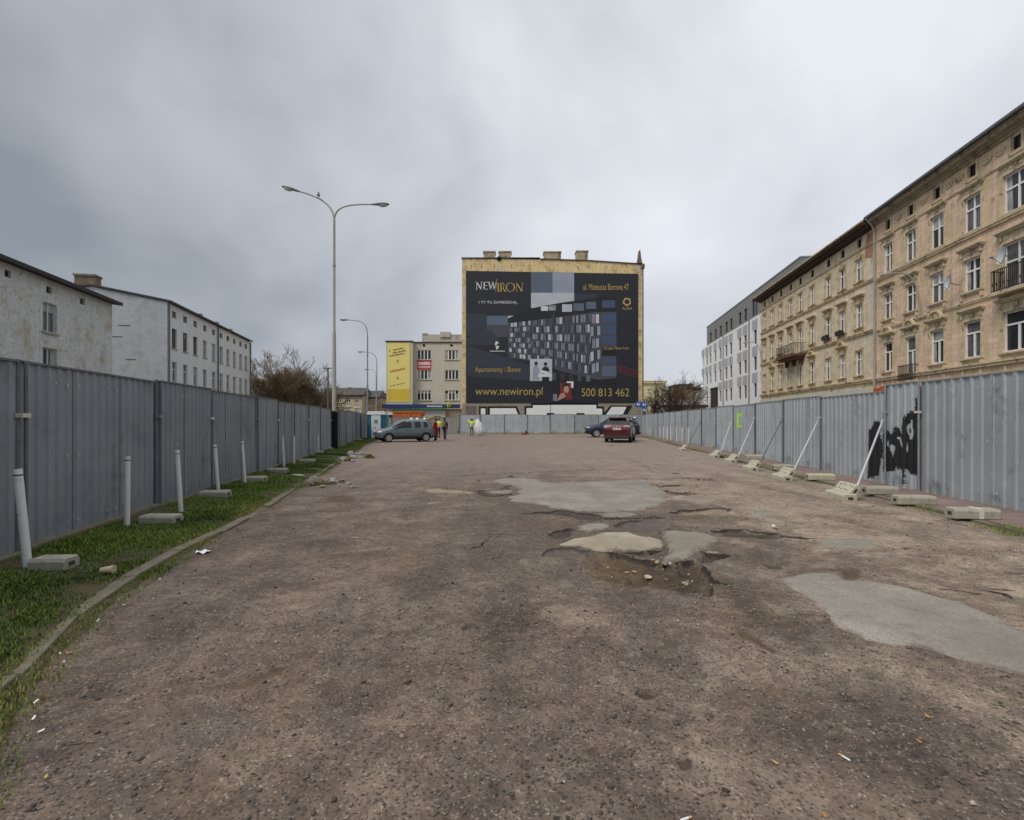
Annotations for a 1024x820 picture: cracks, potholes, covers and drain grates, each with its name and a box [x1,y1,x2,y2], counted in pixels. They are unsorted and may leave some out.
pothole [581,552,731,598]
pothole [548,528,576,539]
crack [470,534,495,549]
pothole [540,547,592,559]
pothole [620,549,666,560]
